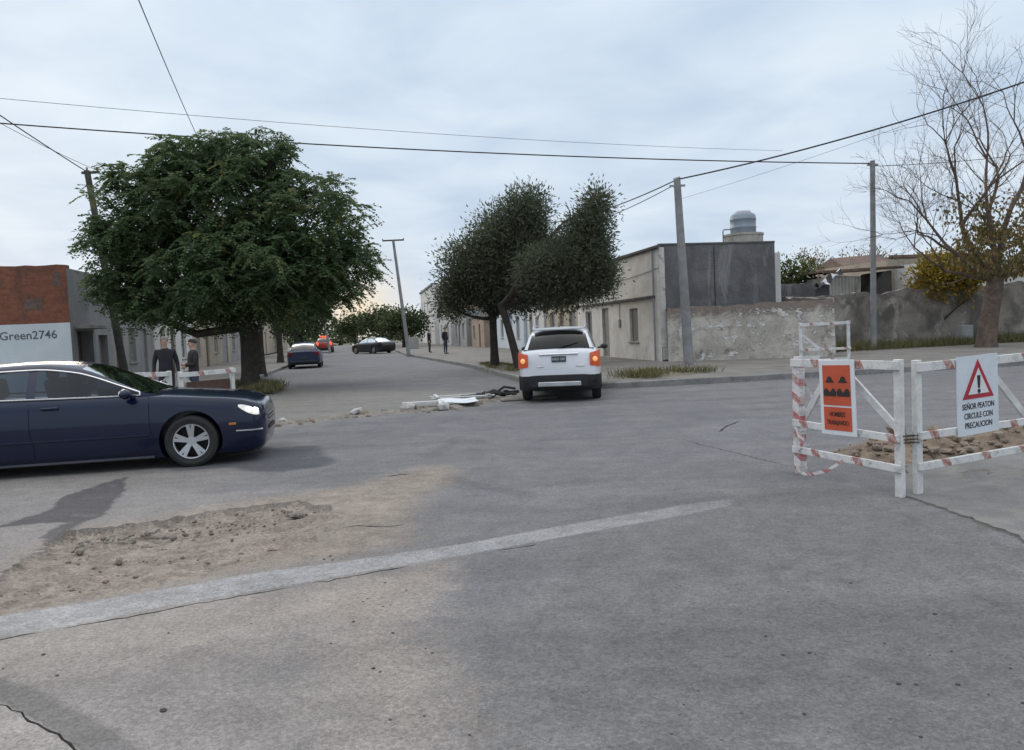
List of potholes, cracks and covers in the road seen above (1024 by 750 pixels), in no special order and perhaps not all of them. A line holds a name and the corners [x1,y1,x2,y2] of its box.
crack [0,704,76,750]
crack [682,421,780,464]
